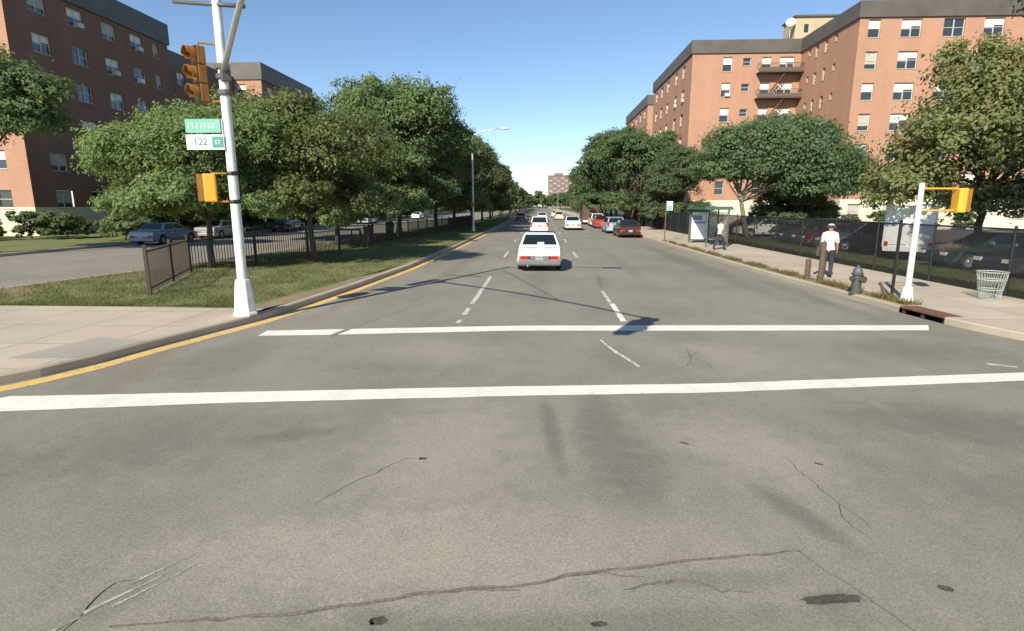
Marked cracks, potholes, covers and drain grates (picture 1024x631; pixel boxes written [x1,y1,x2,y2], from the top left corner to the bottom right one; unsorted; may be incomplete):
pothole [801,594,864,605]
pothole [368,616,388,625]
crack [783,456,871,539]
drain grate [900,306,963,324]
crack [320,458,417,501]
crack [64,550,799,631]
